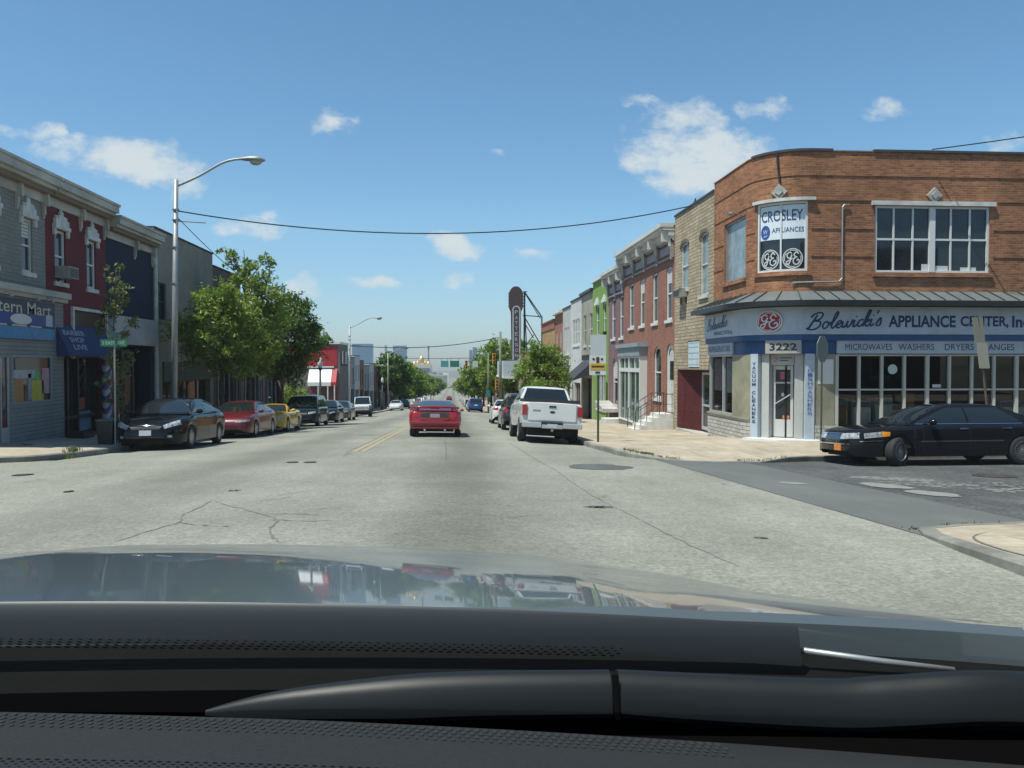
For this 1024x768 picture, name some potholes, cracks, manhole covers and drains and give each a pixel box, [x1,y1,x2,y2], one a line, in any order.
crack [118,490,336,542]
